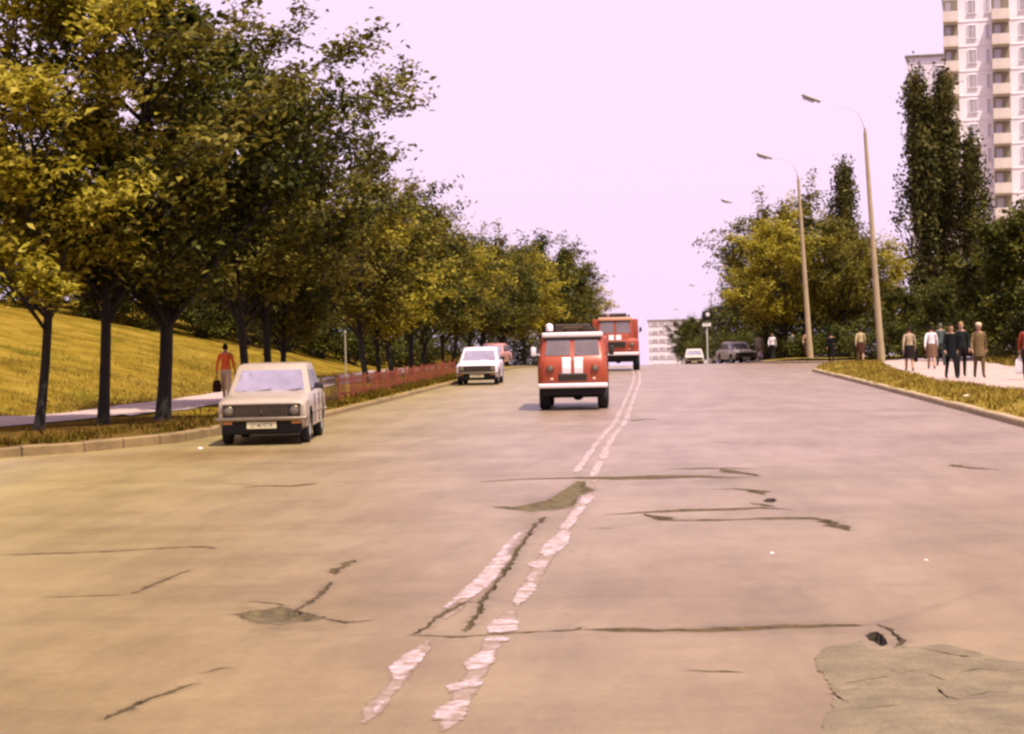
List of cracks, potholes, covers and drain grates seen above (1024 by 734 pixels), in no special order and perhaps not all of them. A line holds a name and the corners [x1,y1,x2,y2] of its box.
pothole [865,631,888,646]
crack [412,517,906,648]
crack [258,560,372,624]
crack [42,570,189,598]
crack [481,468,851,531]
crack [103,667,227,720]
pothole [231,607,327,626]
crack [1,546,215,556]
